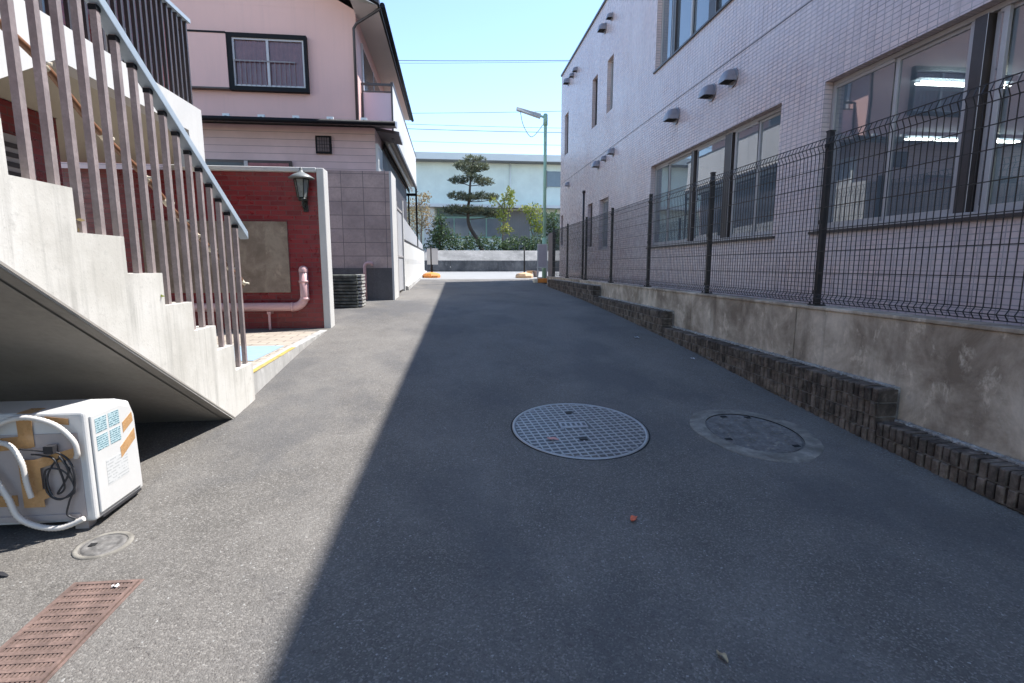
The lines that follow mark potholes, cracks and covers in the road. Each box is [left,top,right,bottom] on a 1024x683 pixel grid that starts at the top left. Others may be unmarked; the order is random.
manhole cover [71,531,134,560]
manhole cover [689,409,824,463]
manhole cover [511,403,650,460]
drain grate [0,579,144,683]
